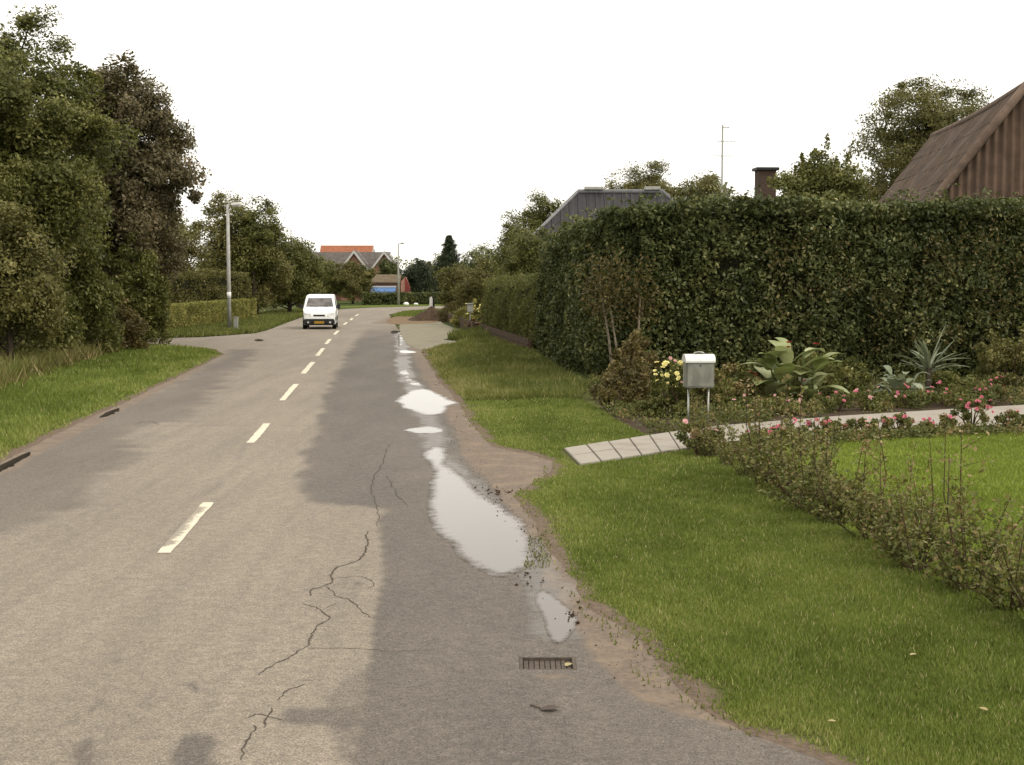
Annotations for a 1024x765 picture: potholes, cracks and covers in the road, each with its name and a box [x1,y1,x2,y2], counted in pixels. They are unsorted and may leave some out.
drain grate [519,657,577,669]
crack [258,445,408,675]
crack [240,684,304,759]
